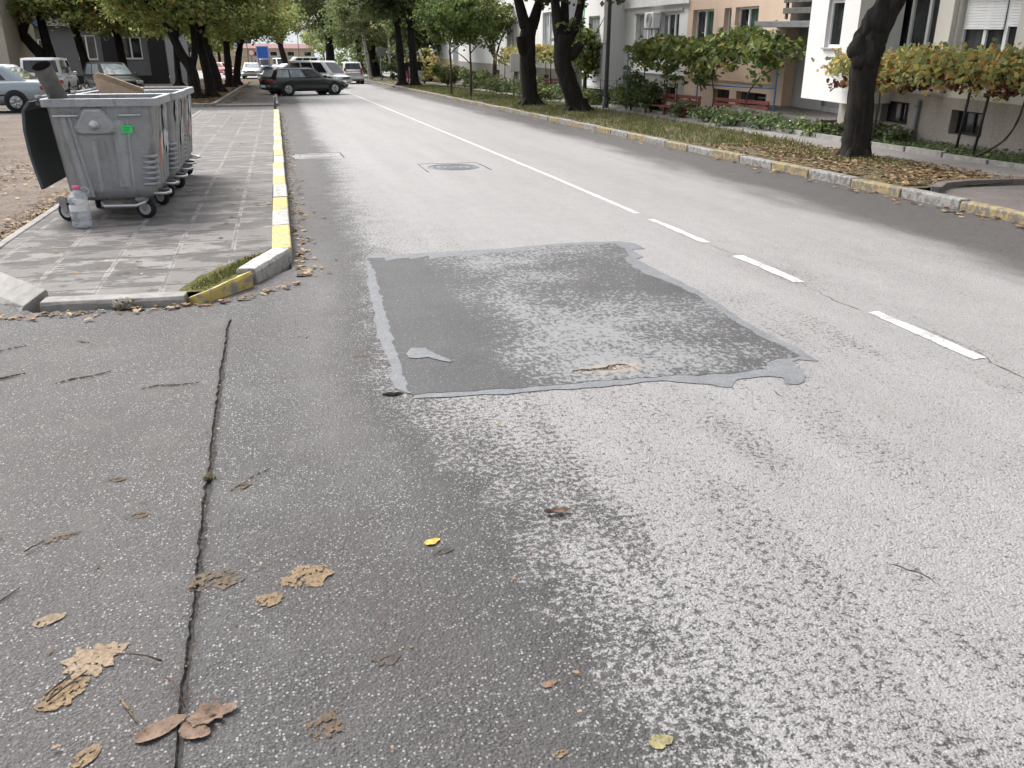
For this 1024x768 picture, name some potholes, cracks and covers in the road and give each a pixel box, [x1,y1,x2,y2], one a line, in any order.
crack [887,563,936,584]
manhole cover [418,162,492,172]
pothole [572,363,635,373]
